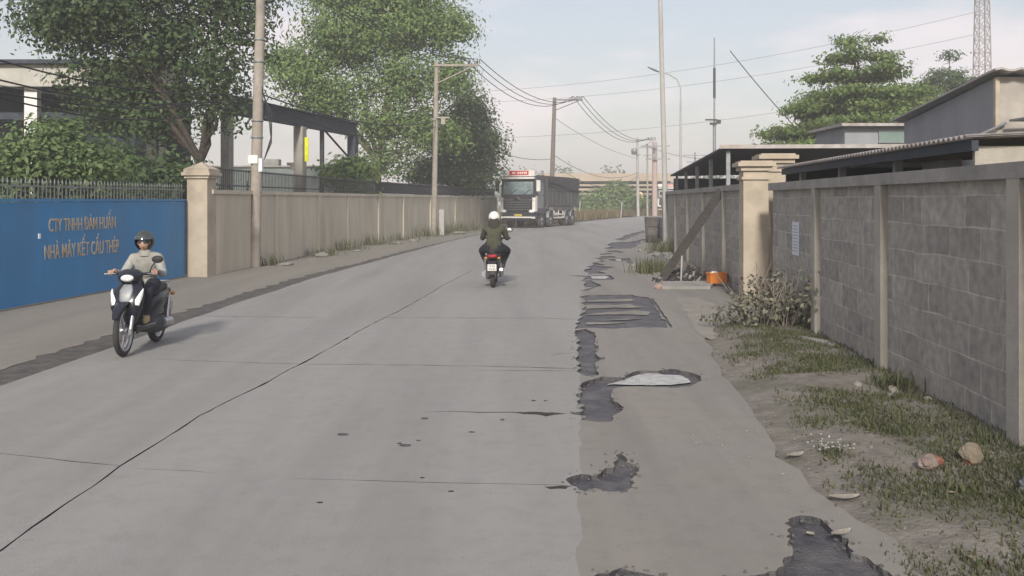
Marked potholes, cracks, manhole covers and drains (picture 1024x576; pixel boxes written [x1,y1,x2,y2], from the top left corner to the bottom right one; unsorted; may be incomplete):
pothole [580,280,602,291]
pothole [562,450,643,495]
pothole [584,256,616,275]
pothole [723,511,900,576]
pothole [570,368,702,422]
